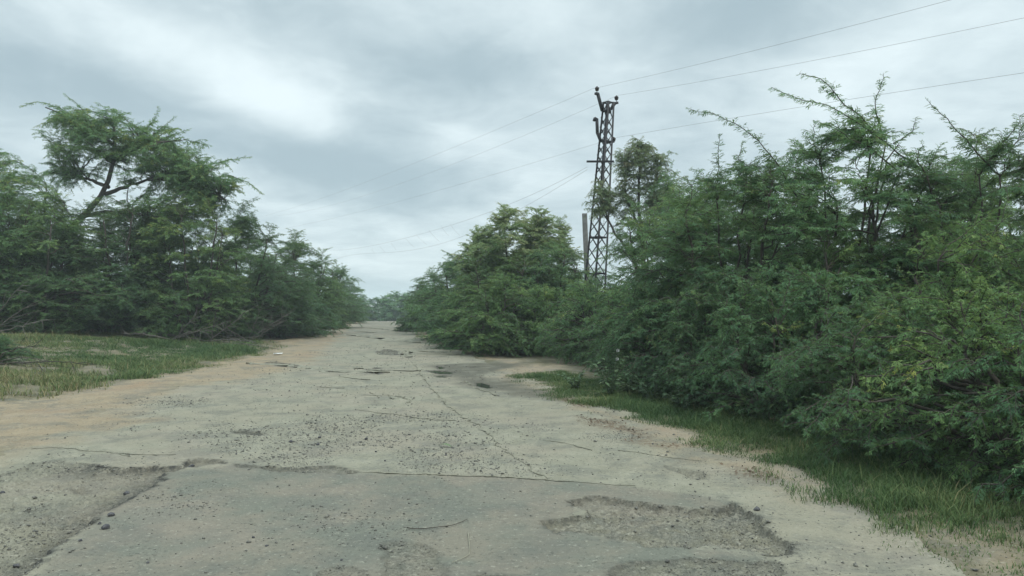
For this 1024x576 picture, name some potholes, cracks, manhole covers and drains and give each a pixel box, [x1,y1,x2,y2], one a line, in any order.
pothole [608,557,785,576]
pothole [0,458,228,576]
pothole [538,496,801,557]
crack [246,328,634,486]
